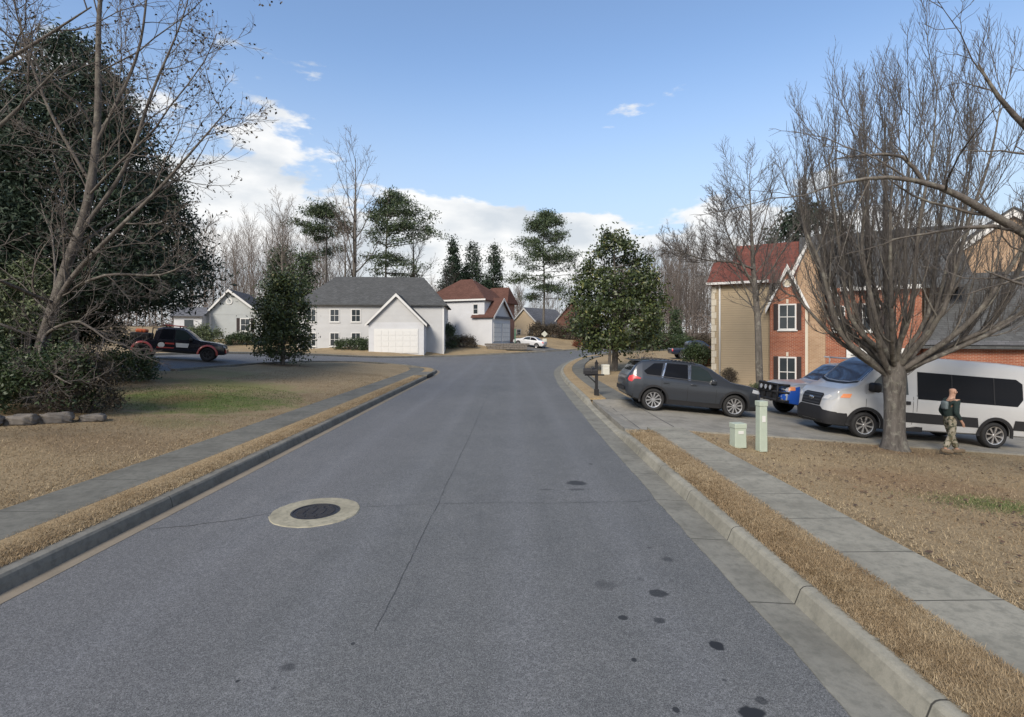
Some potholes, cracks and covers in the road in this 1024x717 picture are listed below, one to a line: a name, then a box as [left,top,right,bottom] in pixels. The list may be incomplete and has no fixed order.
manhole cover [268,498,360,528]
